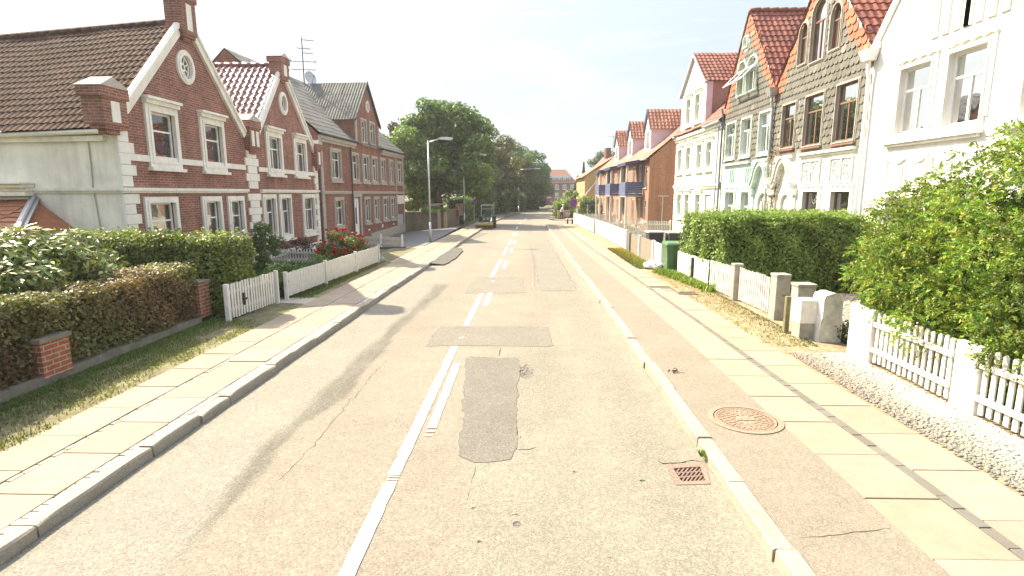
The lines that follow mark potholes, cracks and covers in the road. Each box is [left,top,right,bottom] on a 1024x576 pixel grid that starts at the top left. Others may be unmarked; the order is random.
manhole cover [707,405,785,435]
crack [802,522,891,538]
crack [273,366,381,485]
pothole [519,364,536,379]
drain grate [665,462,710,485]
